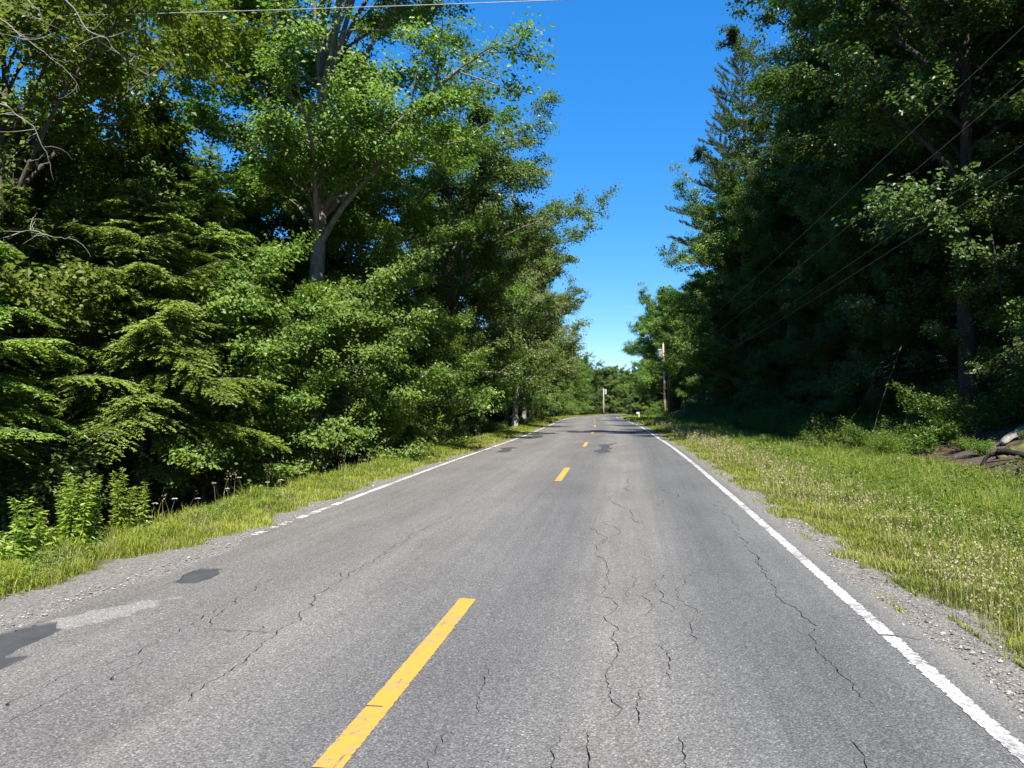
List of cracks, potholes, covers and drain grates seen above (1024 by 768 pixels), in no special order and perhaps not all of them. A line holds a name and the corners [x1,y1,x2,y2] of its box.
crack [427,669,489,768]
crack [2,516,452,725]
crack [715,505,874,705]
crack [591,476,679,543]
crack [550,540,698,768]
